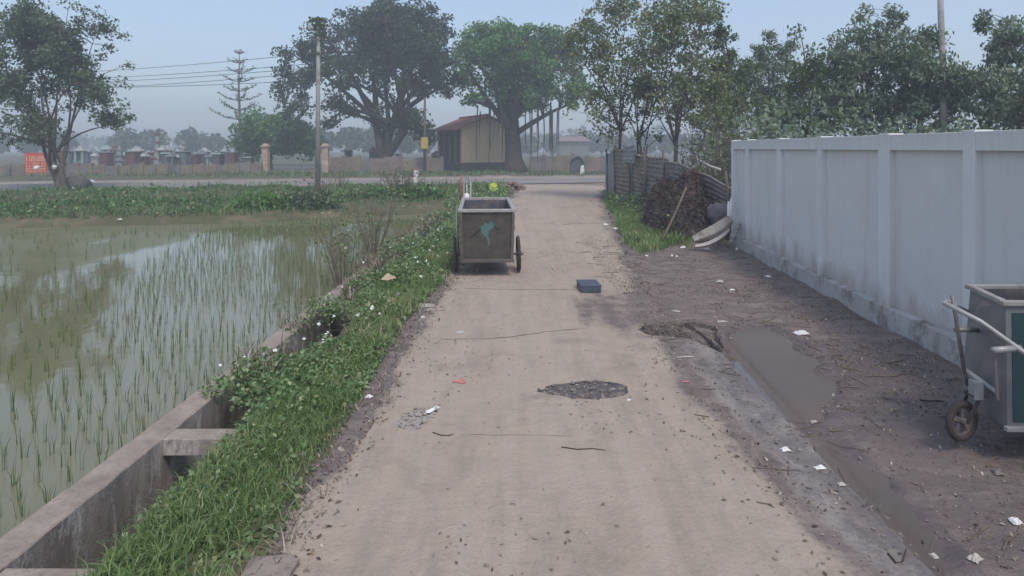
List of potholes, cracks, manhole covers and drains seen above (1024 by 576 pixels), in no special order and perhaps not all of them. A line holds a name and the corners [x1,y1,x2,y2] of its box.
pothole [638,322,724,353]
pothole [536,380,629,399]
crack [446,328,585,340]
